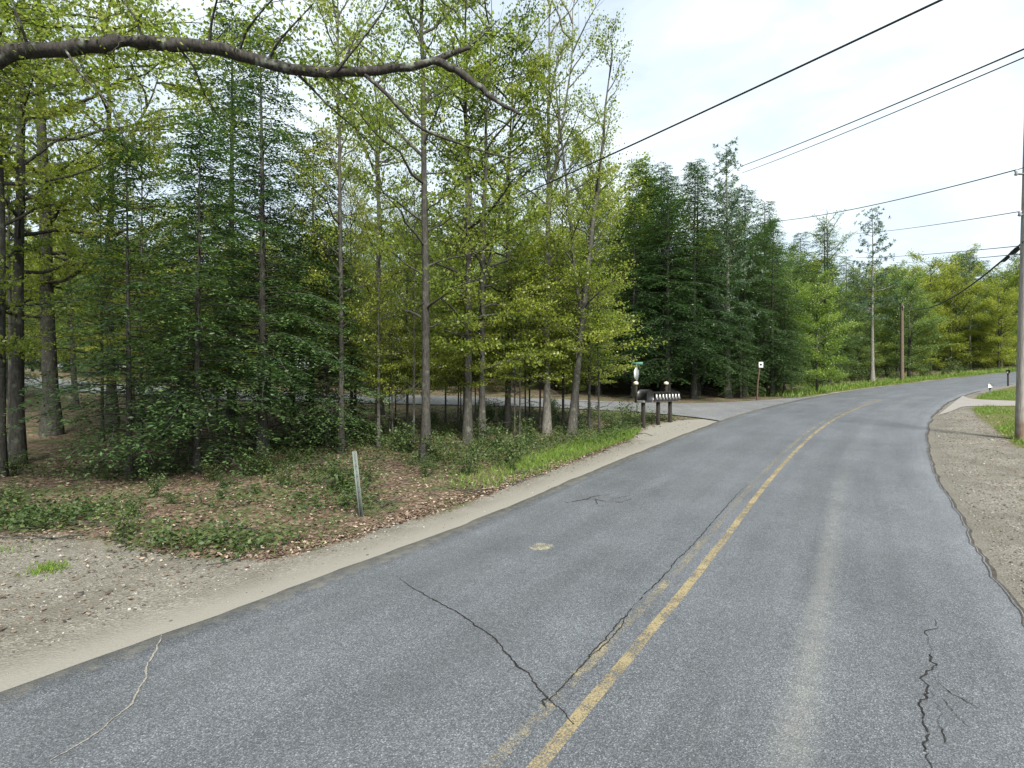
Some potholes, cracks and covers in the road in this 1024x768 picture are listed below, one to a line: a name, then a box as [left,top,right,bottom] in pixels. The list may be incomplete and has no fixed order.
crack [51,635,162,760]
crack [398,493,738,724]
crack [918,620,978,768]
